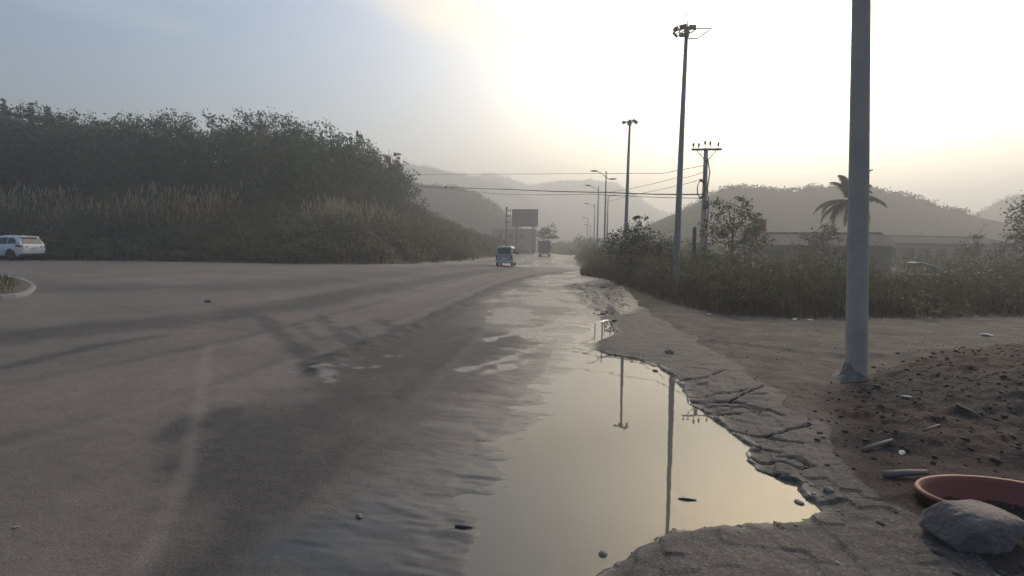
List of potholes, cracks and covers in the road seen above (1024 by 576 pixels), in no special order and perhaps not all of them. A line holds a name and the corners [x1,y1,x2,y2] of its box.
crack [680,370,813,477]
pothole [418,318,835,576]
